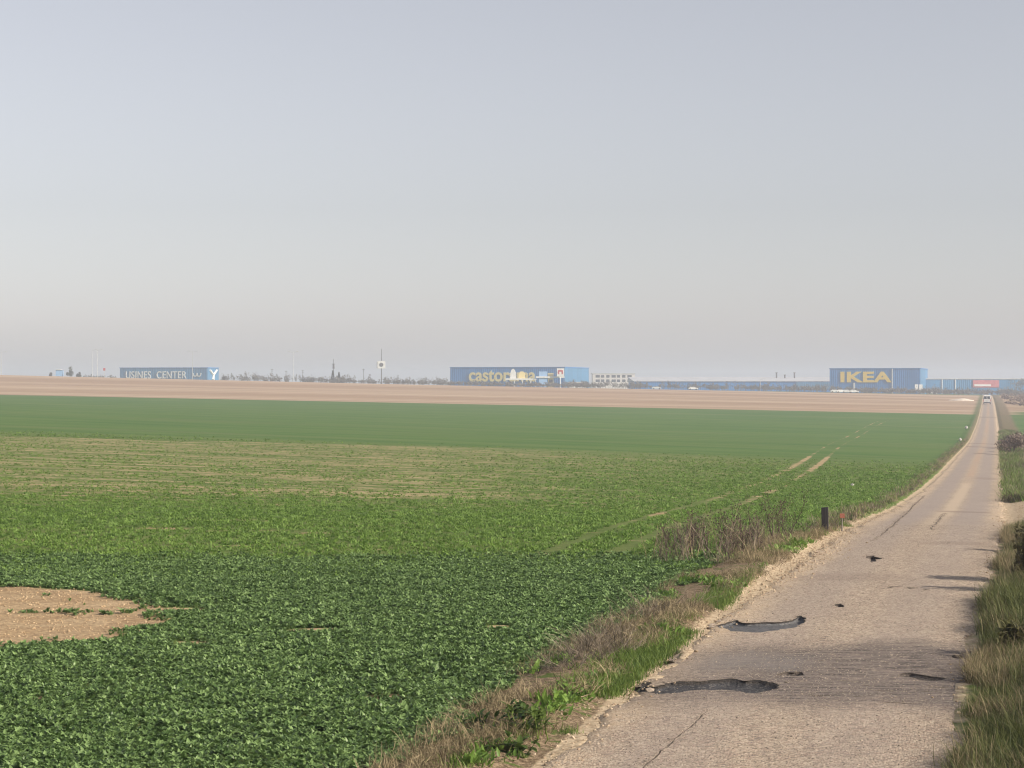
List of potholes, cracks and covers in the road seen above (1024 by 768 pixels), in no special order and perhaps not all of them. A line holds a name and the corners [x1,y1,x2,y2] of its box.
pothole [707,616,806,633]
crack [643,712,706,768]
pothole [900,673,946,681]
pothole [634,679,779,694]
crack [874,496,924,540]
